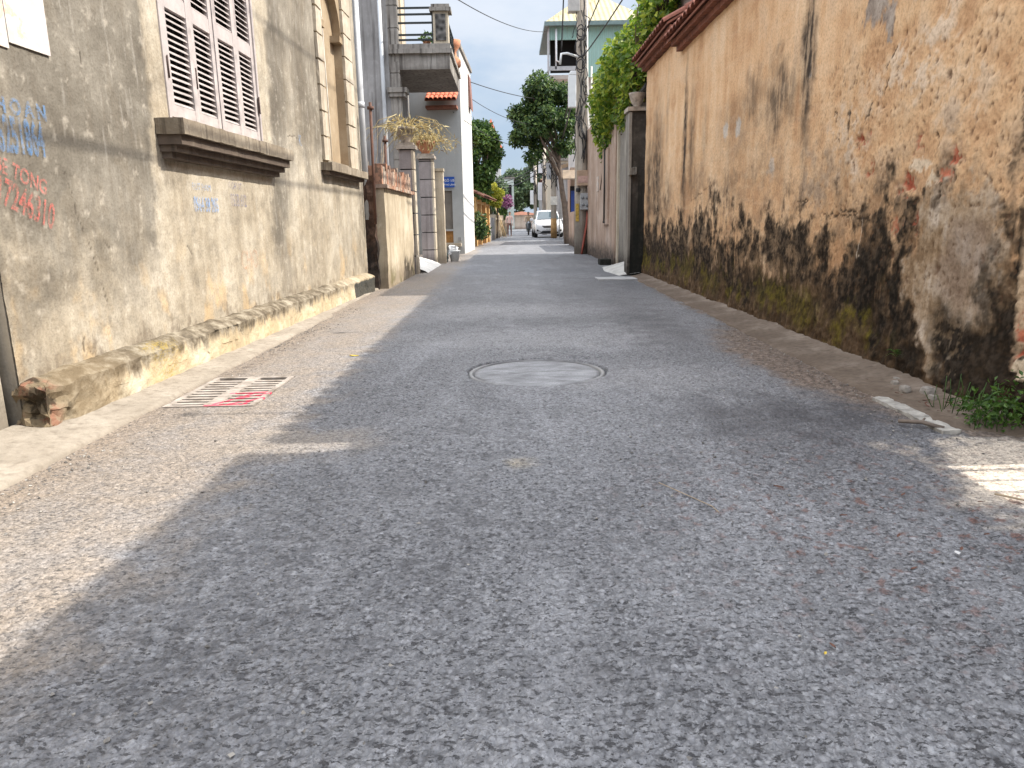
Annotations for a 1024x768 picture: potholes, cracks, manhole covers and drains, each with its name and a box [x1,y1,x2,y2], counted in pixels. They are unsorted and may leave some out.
manhole cover [469,359,605,387]
drain grate [162,376,294,408]
